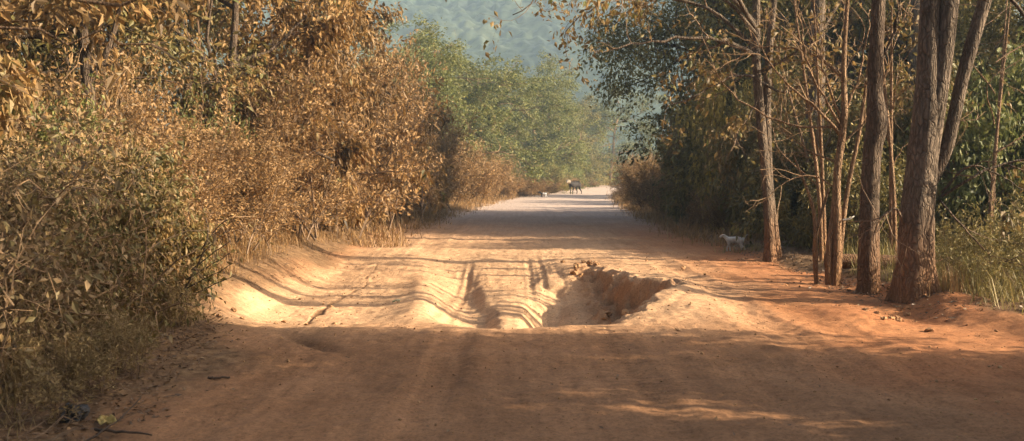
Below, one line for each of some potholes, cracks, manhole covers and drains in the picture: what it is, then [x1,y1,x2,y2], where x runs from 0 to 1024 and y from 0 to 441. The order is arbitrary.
crack [301,260,386,325]
pothole [514,263,684,329]
